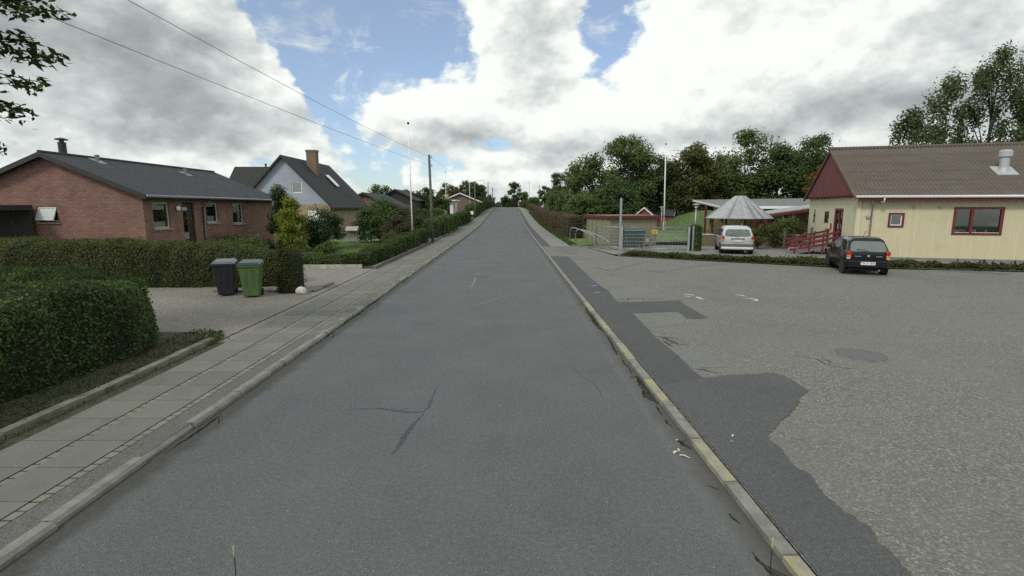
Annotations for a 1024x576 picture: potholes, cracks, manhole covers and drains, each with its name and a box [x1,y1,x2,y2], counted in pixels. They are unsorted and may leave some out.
manhole cover [831,348,892,363]
crack [606,335,632,372]
